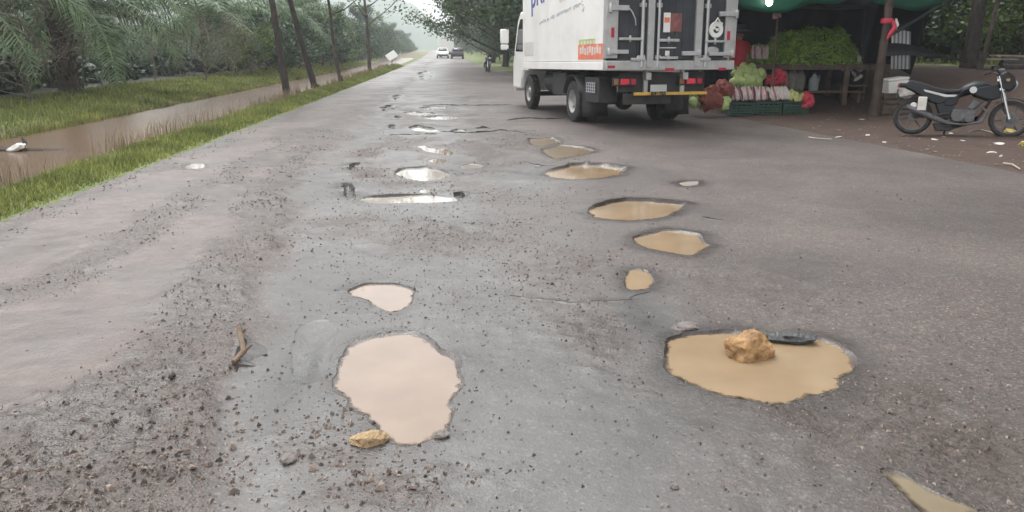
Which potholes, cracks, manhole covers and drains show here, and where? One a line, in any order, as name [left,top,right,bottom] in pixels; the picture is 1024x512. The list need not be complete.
pothole [527,137,561,147]
pothole [879,467,984,512]
pothole [624,268,655,290]
pothole [632,229,711,255]
pothole [587,197,687,221]
pothole [662,329,857,405]
crack [511,291,650,305]
pothole [347,283,416,313]
pothole [332,330,465,447]
pothole [541,145,594,159]
pothole [359,194,459,204]
pothole [542,163,627,179]
